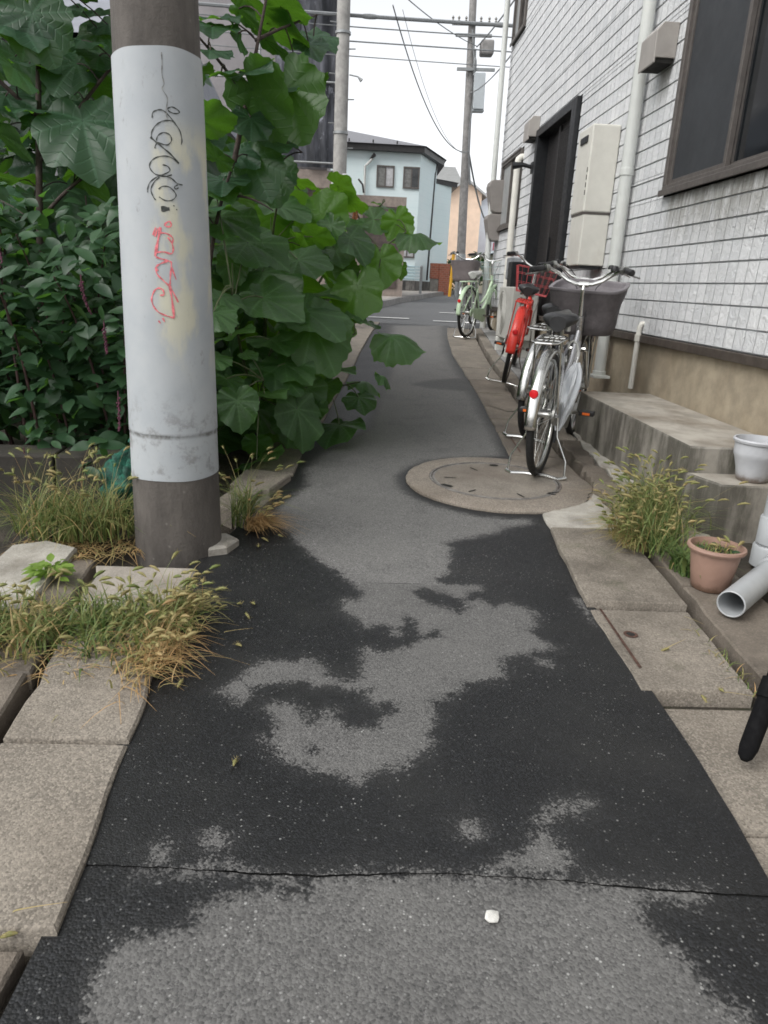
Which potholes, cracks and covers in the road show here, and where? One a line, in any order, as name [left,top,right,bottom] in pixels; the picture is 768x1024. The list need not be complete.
manhole cover [406,457,594,514]
